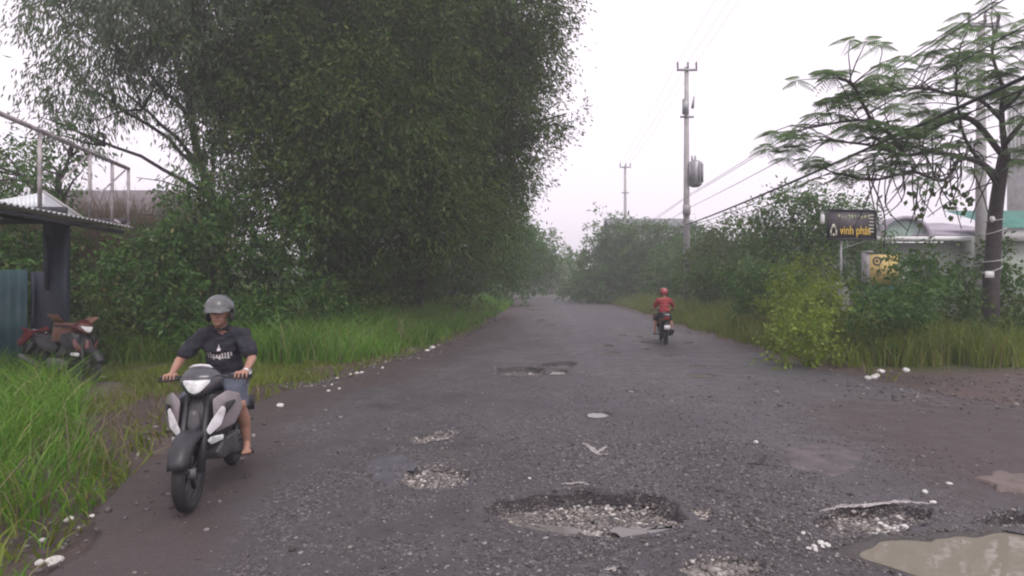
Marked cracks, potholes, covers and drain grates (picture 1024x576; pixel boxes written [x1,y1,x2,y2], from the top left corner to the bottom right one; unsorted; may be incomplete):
pothole [540,361,580,369]
pothole [395,463,476,491]
pothole [404,430,461,445]
pothole [470,485,700,542]
pothole [832,526,1024,576]
pothole [971,508,1024,534]
pothole [671,553,772,576]
pothole [491,365,551,377]
pothole [802,501,939,540]
